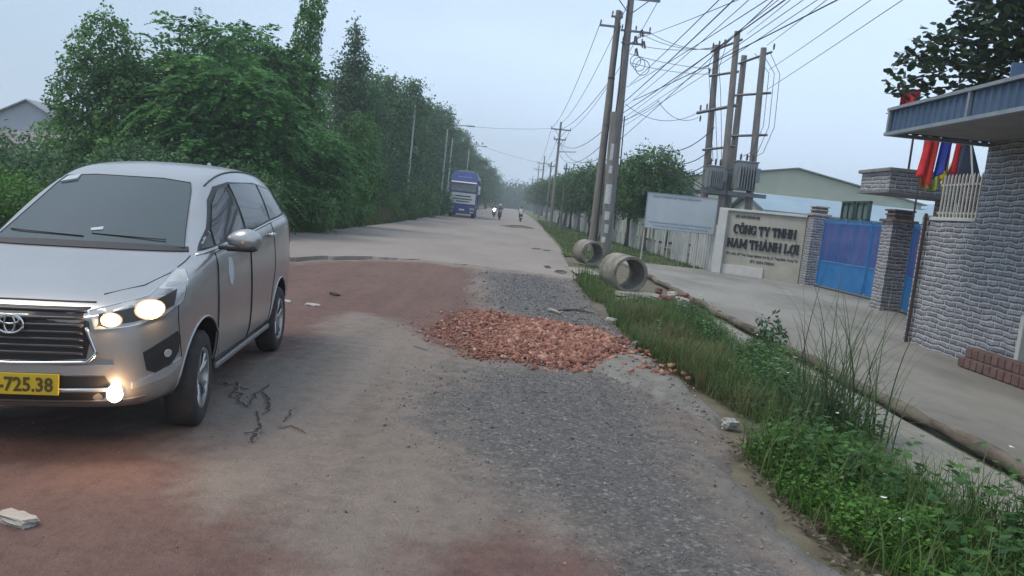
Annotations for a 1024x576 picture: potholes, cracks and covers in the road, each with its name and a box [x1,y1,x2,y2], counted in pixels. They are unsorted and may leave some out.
crack [221,382,306,442]
